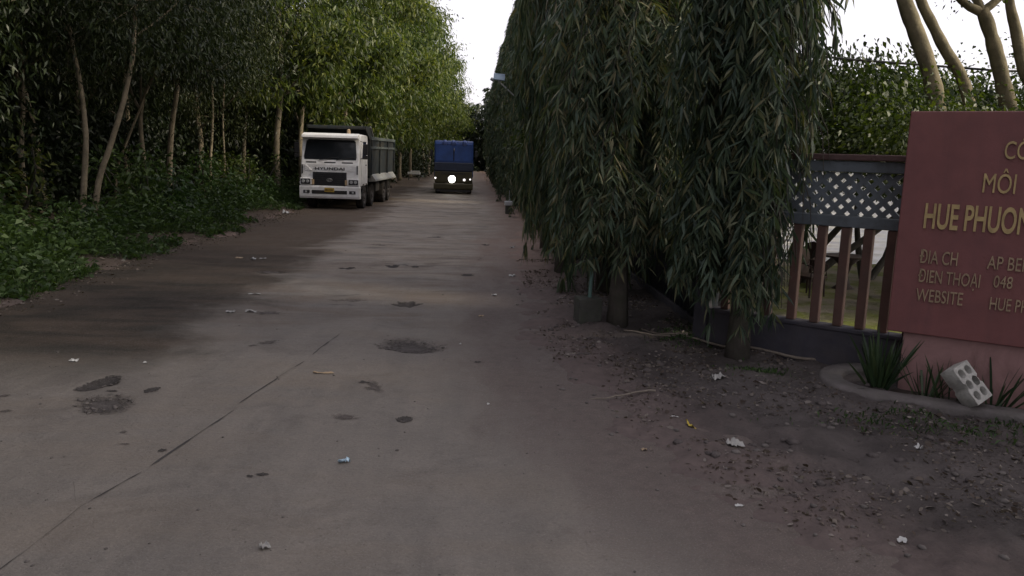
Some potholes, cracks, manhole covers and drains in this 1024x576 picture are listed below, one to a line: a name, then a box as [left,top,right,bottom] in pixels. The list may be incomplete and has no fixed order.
pothole [76,375,121,391]
pothole [377,340,447,354]
pothole [72,394,134,415]
